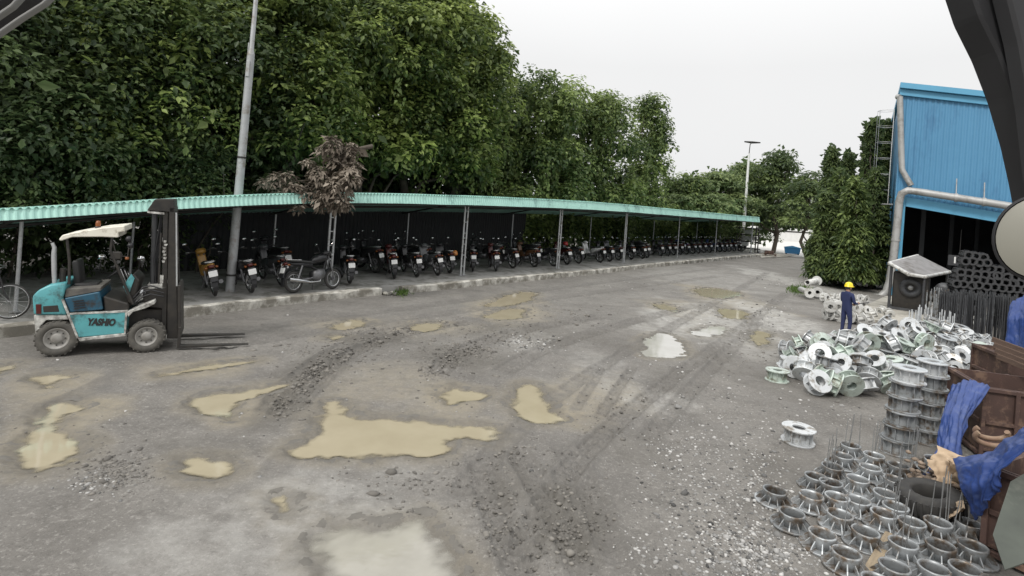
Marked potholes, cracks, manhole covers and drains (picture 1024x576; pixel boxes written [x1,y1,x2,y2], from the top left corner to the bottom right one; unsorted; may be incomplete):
pothole [285,397,509,465]
pothole [324,318,377,331]
pothole [149,358,261,376]
pothole [404,321,450,333]
pothole [500,382,574,425]
pothole [480,290,544,308]
pothole [634,331,694,359]
pothole [687,324,747,338]
pothole [180,380,299,423]
pothole [163,451,245,482]
pothole [475,306,533,321]
pothole [709,306,756,323]
